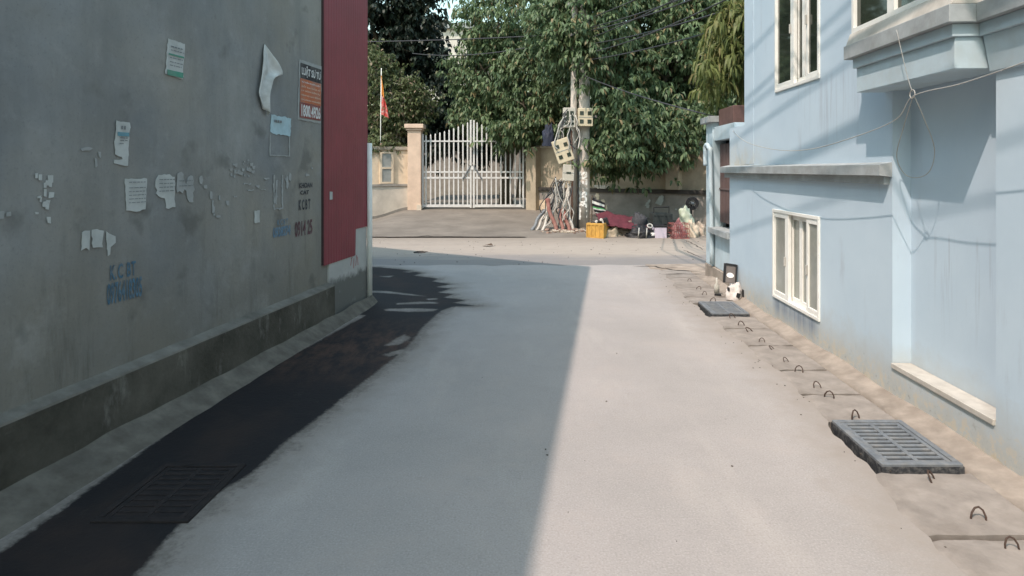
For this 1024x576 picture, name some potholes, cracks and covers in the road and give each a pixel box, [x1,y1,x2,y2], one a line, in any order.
drain grate [90,463,246,523]
drain grate [698,301,750,317]
drain grate [831,420,965,474]
